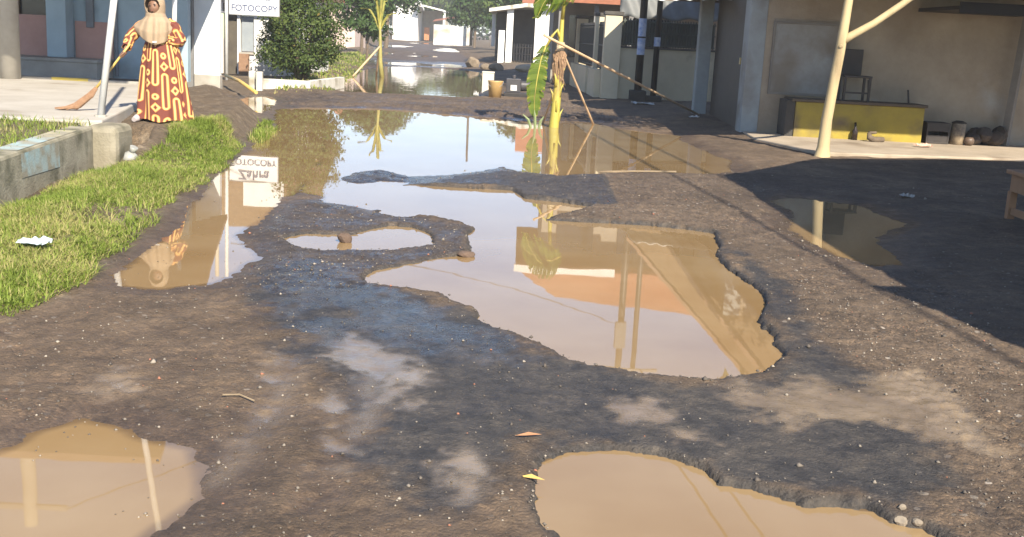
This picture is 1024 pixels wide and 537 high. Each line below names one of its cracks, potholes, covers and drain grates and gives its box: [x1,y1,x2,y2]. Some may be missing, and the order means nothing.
pothole [0,404,252,537]
pothole [510,435,972,537]
pothole [338,67,482,98]
pothole [300,105,522,214]
pothole [271,220,446,253]
pothole [502,116,746,176]
pothole [92,105,336,293]
pothole [351,182,804,383]
